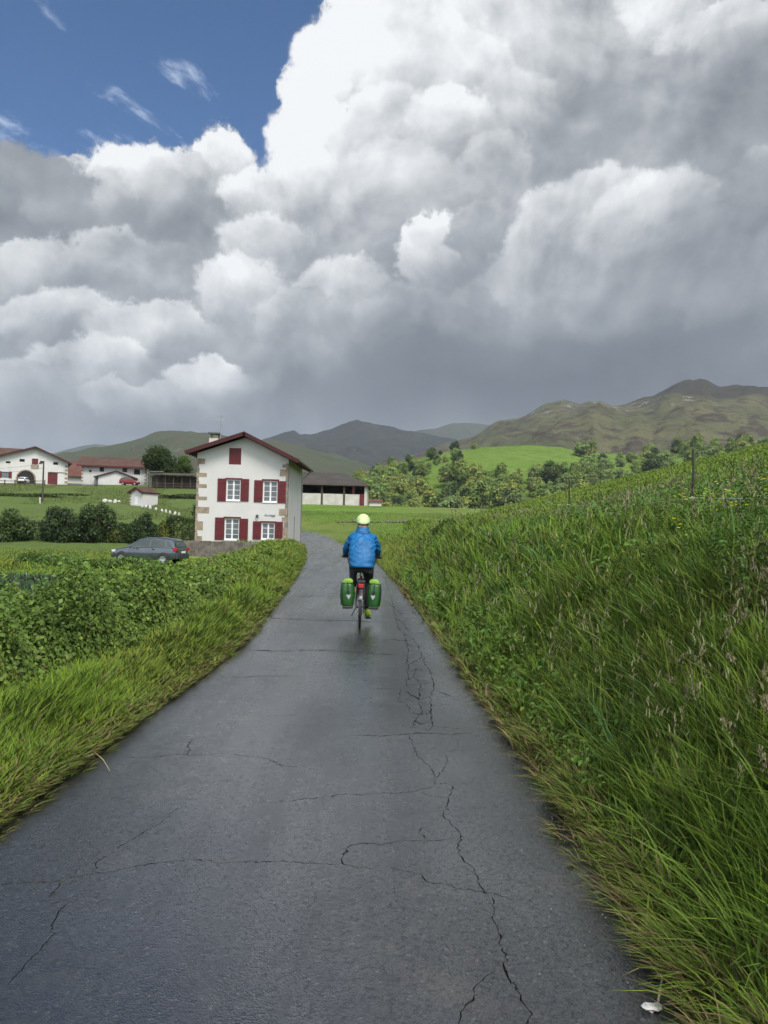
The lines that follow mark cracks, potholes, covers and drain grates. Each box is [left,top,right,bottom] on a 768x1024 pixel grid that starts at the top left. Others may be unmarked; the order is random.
crack [1,741,533,1024]
crack [253,569,468,741]
